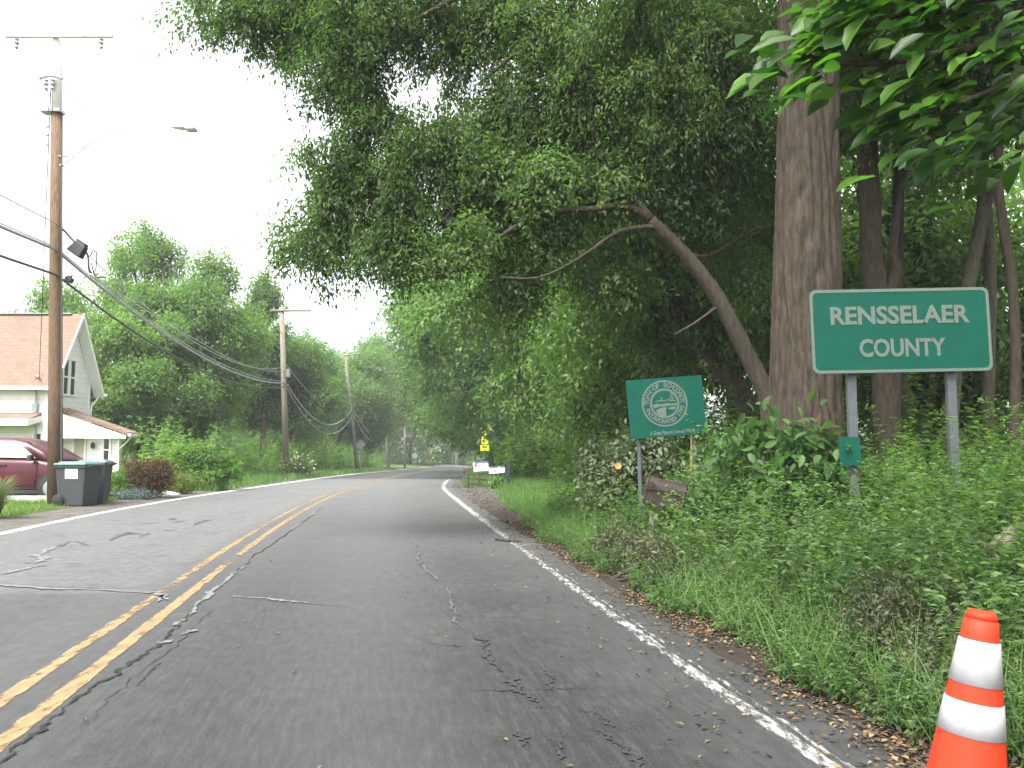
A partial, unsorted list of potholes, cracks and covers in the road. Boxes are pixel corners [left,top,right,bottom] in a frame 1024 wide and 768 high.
crack [0,509,343,762]
crack [408,527,593,708]
crack [512,708,644,768]
